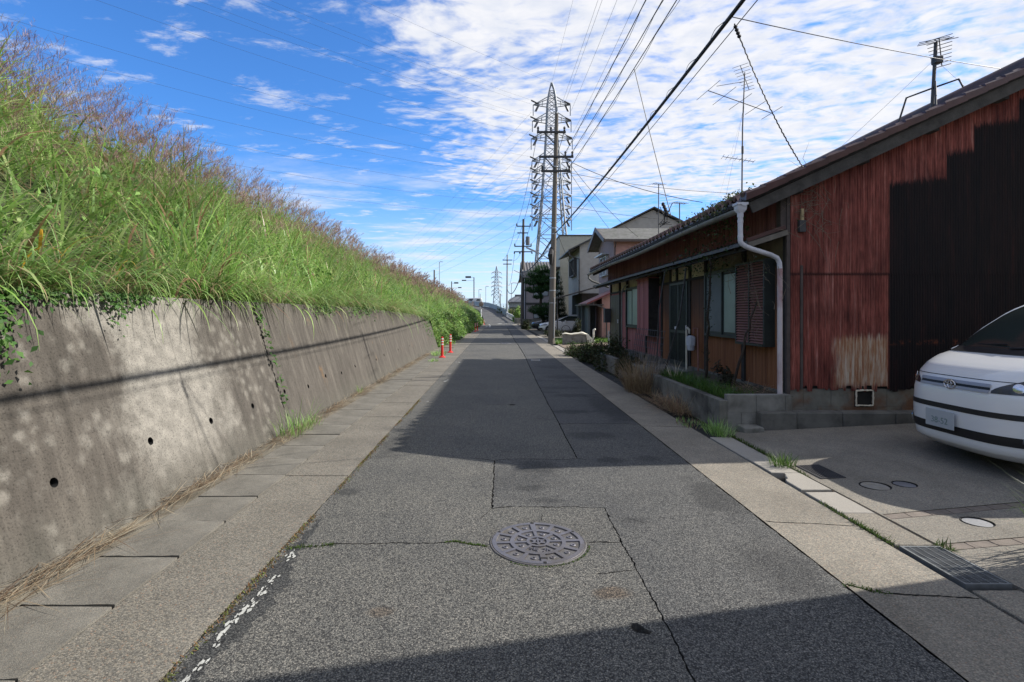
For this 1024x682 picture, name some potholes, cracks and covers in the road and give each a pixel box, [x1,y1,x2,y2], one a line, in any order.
utility cover [959,517,996,528]
utility cover [859,481,892,490]
manhole cover [490,522,587,566]
drain grate [899,546,1013,593]
